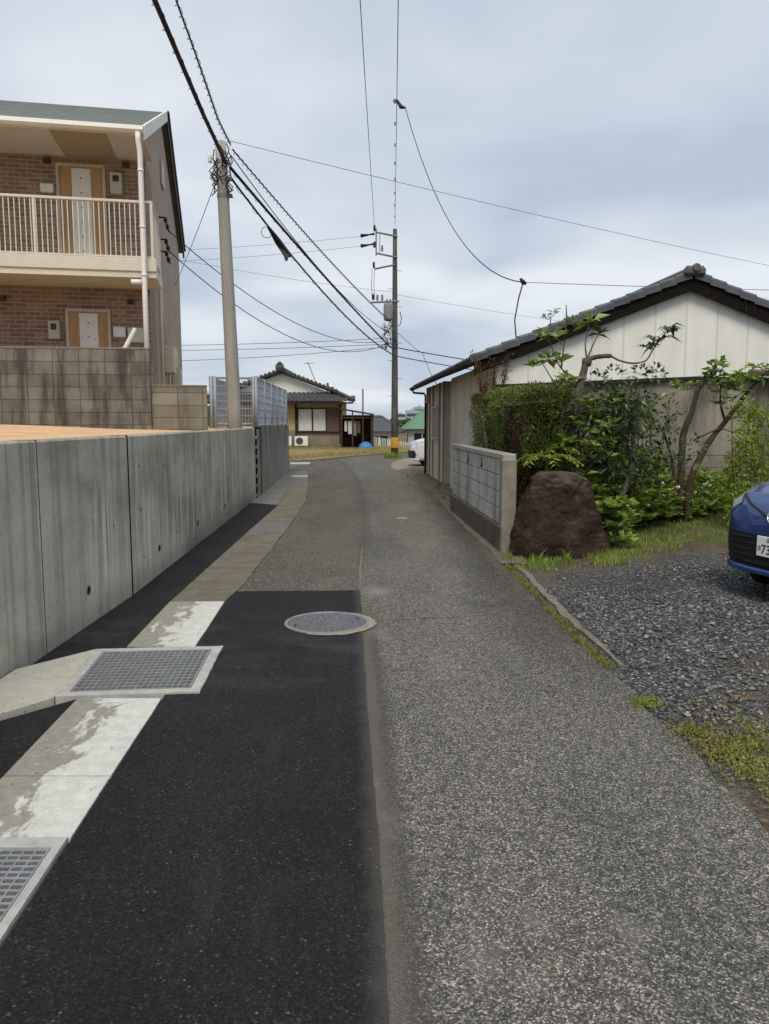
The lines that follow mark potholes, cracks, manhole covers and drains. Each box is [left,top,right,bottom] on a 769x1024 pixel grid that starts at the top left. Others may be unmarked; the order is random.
drain grate [0,837,68,949]
manhole cover [284,611,376,635]
drain grate [55,646,223,705]
